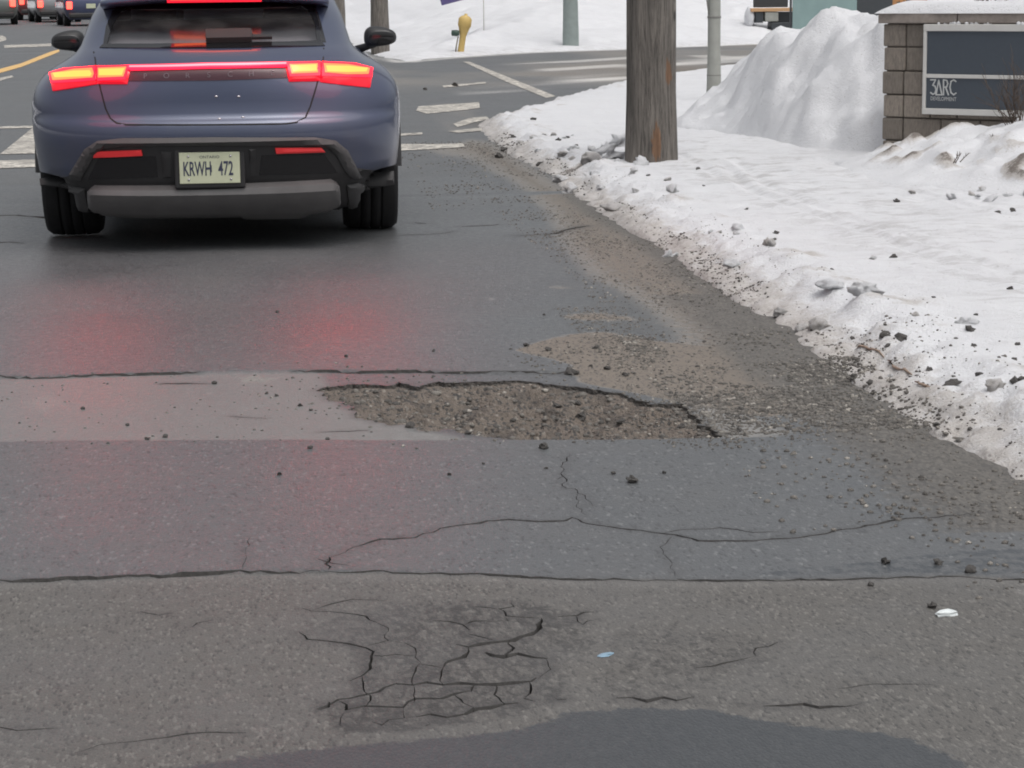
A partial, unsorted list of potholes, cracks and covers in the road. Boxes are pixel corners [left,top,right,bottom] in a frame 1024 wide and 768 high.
pothole [317,381,723,440]
crack [768,684,931,709]
crack [696,642,778,668]
crack [319,454,969,571]
crack [299,599,591,730]
